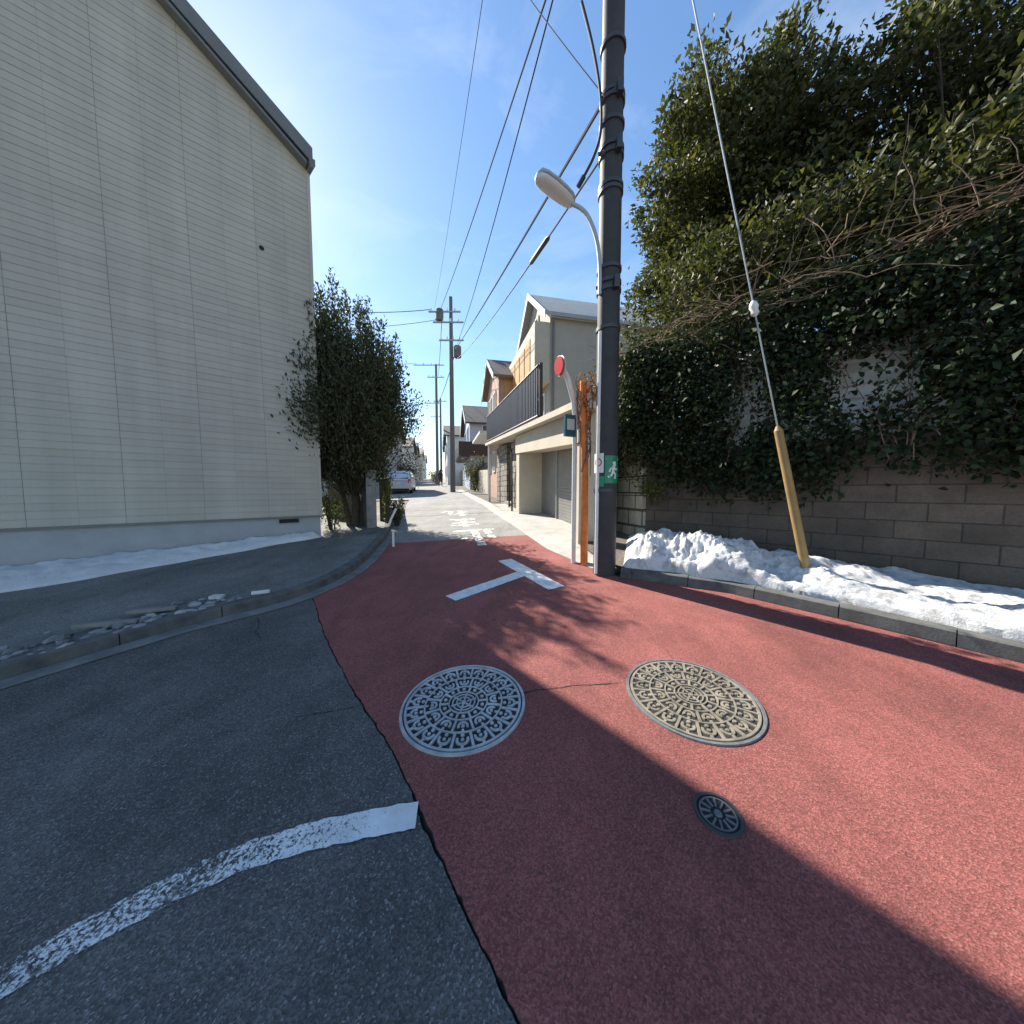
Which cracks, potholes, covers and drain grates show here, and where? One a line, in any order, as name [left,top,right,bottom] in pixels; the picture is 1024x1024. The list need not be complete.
manhole cover [399,665,525,757]
manhole cover [626,659,768,747]
crack [519,682,621,693]
manhole cover [693,791,745,839]
